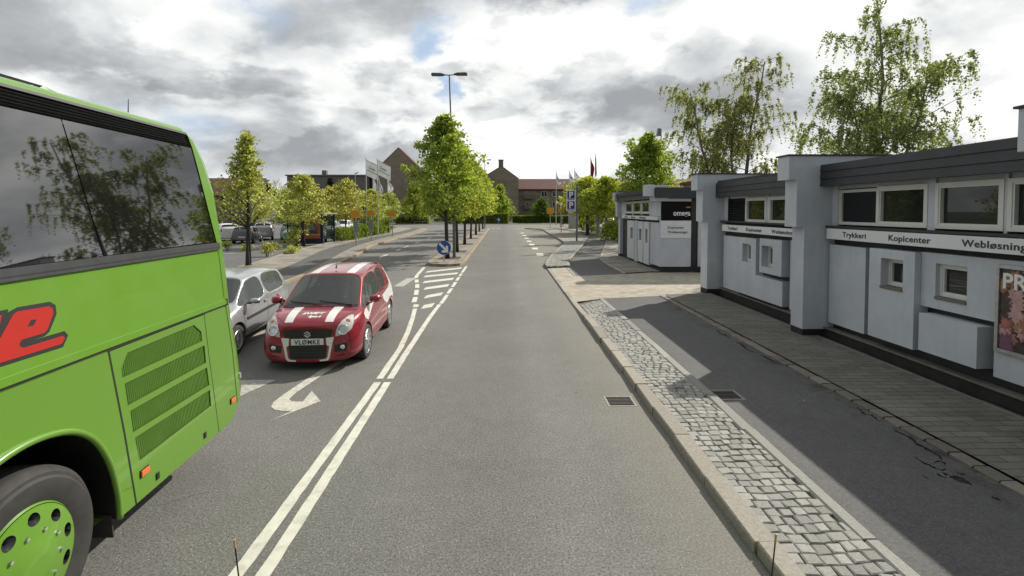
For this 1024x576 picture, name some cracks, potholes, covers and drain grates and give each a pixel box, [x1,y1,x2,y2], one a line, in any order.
drain grate [603,396,637,407]
drain grate [710,390,746,400]
